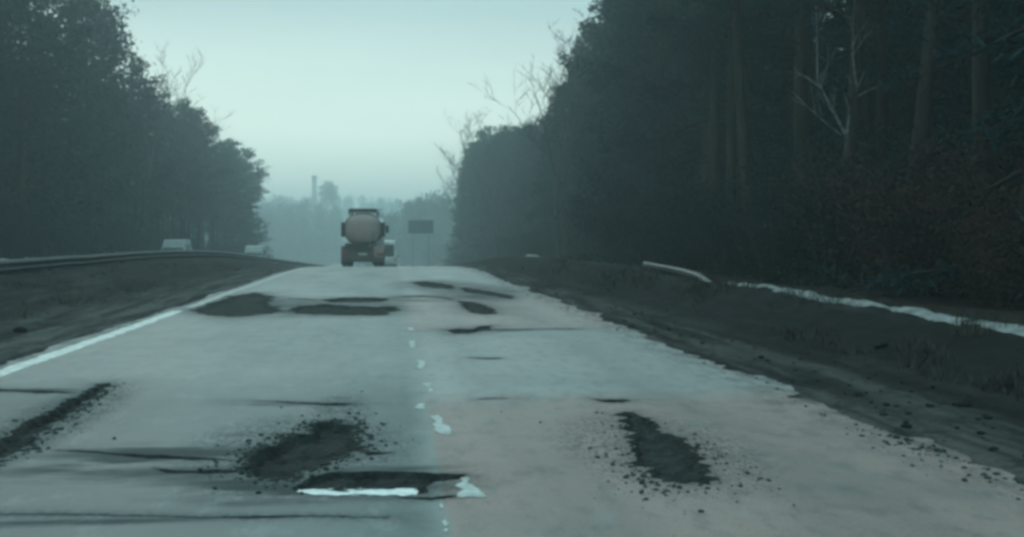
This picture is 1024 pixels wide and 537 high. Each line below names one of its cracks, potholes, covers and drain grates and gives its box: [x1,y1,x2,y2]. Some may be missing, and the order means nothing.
crack [58,450,238,474]
pothole [458,301,498,315]
pothole [287,304,400,316]
pothole [447,325,492,334]
pothole [291,471,467,496]
pothole [410,281,456,289]
pothole [244,422,363,479]
pothole [614,411,721,485]
pothole [460,287,515,299]
pothole [0,383,113,459]
pothole [187,292,287,317]
